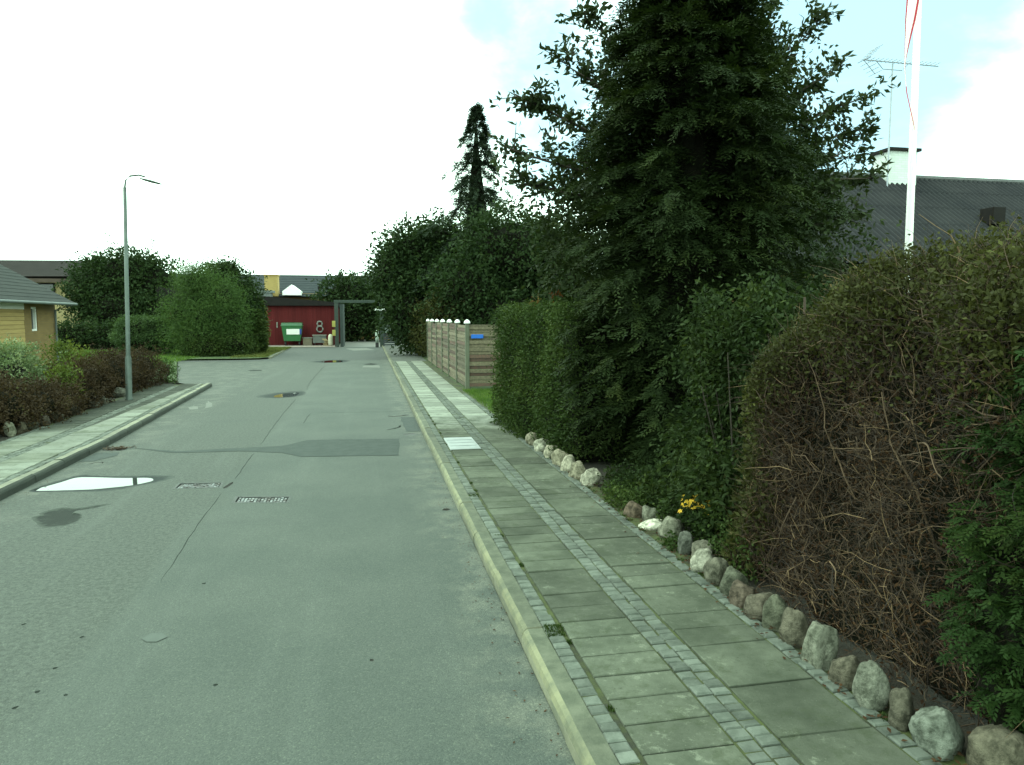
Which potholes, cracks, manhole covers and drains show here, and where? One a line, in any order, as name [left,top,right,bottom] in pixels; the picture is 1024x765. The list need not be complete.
crack [163,359,326,577]
pothole [29,475,175,492]
